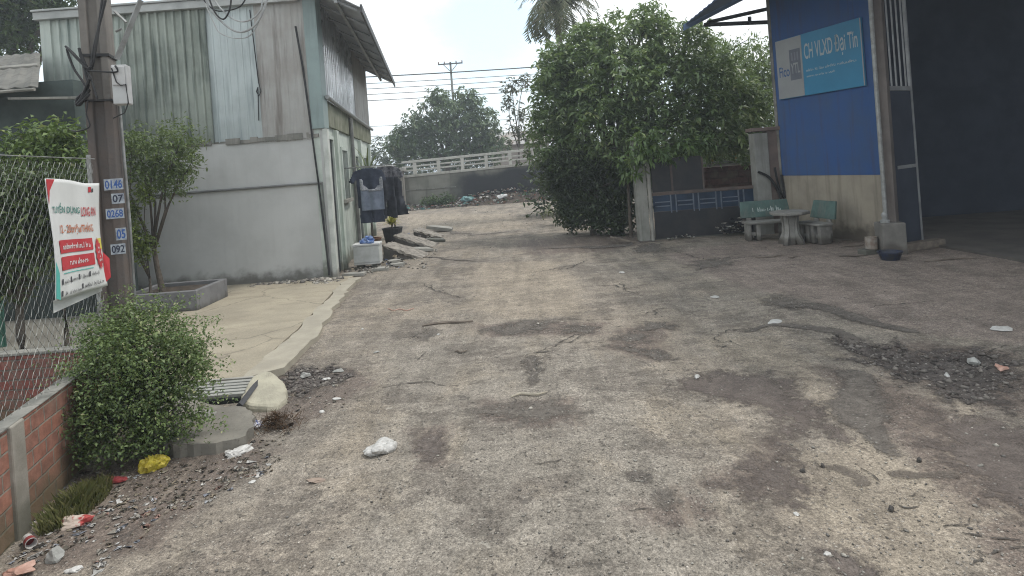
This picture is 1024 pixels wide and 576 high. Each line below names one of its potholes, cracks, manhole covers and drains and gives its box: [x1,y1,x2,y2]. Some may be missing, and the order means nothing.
pothole [827,334,1024,416]
crack [529,318,594,354]
